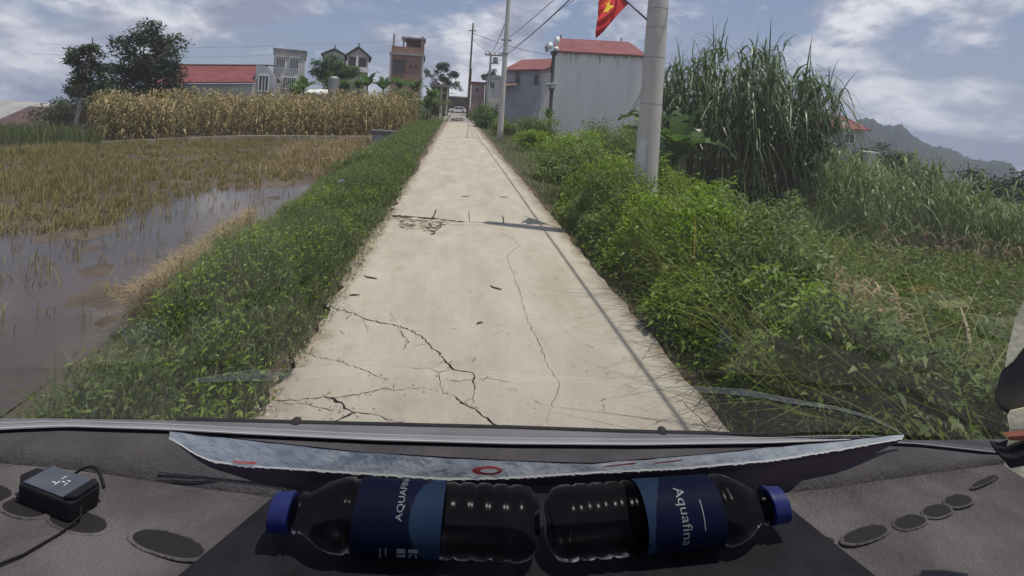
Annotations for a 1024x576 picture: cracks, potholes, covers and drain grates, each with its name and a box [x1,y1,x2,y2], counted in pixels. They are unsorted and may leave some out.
pothole [391,217,449,235]
crack [392,210,560,421]
crack [268,304,504,425]
